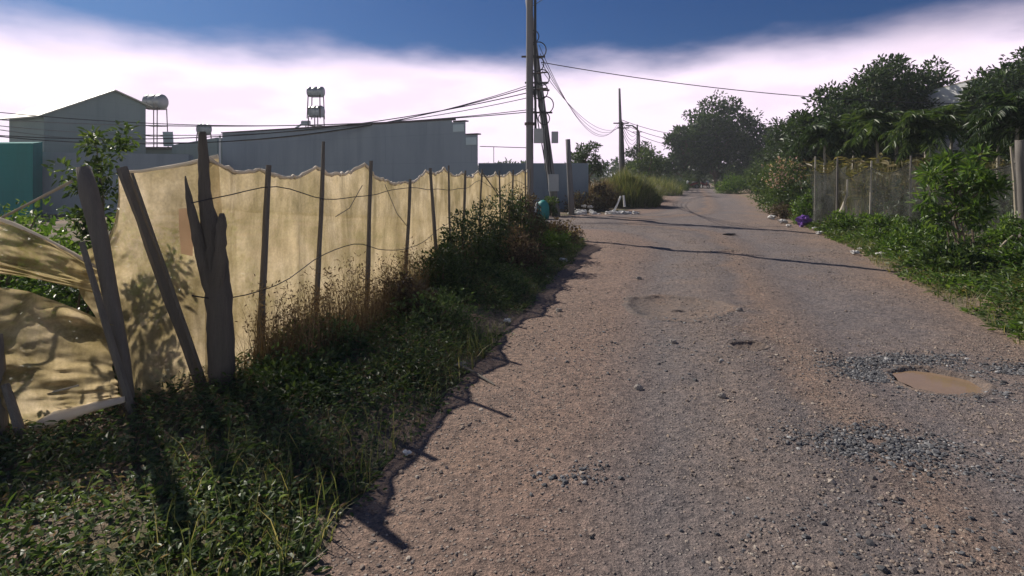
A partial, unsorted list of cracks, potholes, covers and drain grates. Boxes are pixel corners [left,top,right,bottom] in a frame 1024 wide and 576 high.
pothole [728,341,771,351]
pothole [881,365,997,397]
pothole [621,294,742,322]
